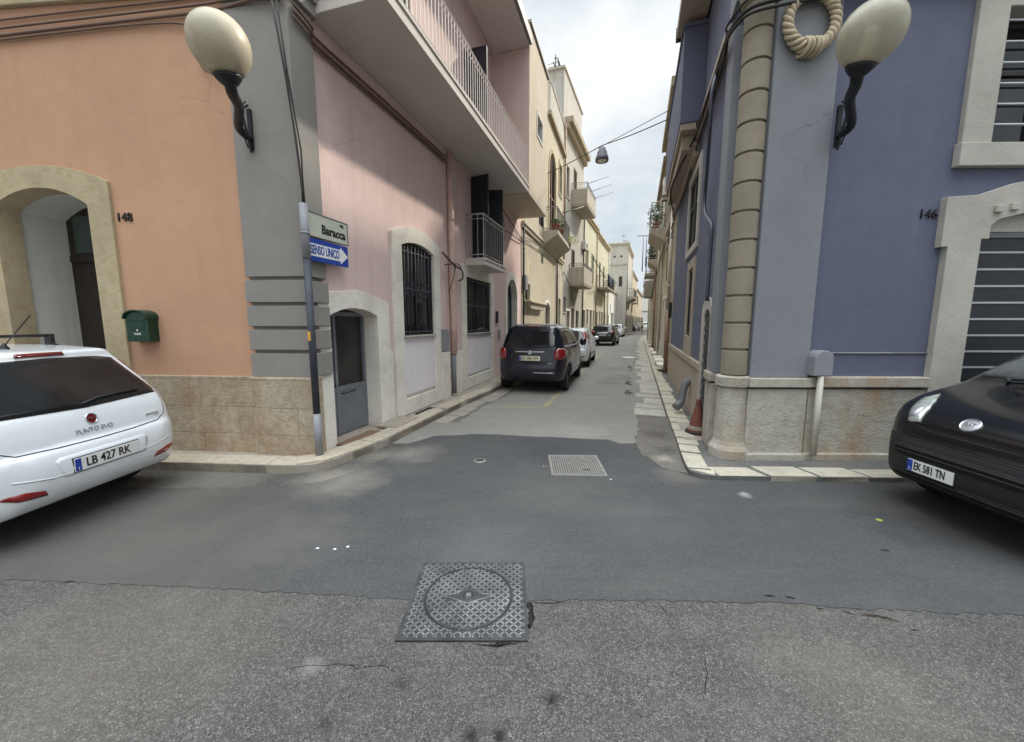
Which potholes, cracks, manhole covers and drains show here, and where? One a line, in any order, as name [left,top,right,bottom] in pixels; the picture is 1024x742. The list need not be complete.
pothole [527,602,535,629]
crack [287,663,397,672]
manhole cover [395,562,528,642]
